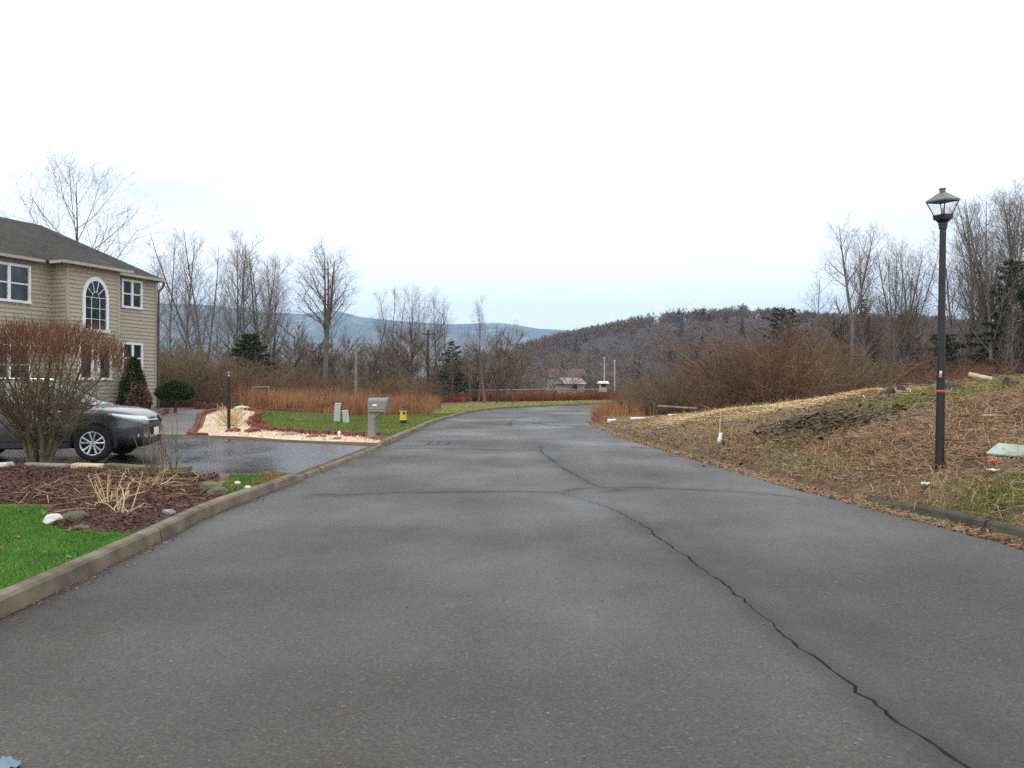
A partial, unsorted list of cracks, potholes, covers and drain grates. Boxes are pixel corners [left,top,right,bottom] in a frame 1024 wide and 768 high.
crack [353,441,972,768]
